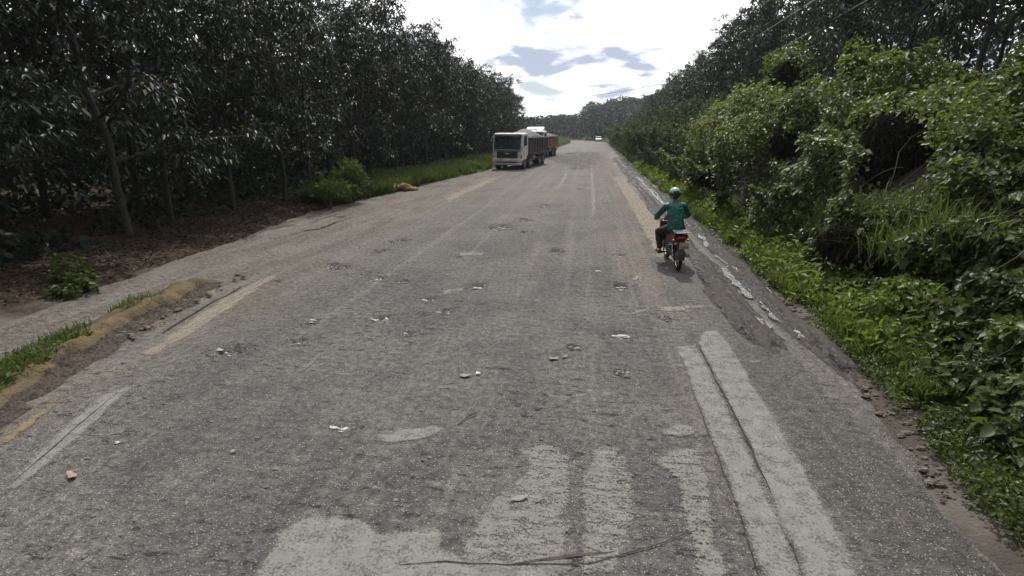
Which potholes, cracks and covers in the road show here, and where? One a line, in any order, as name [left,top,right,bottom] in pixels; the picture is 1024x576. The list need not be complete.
pothole [318,259,358,273]
pothole [482,223,515,232]
pothole [611,368,633,379]
pothole [604,281,637,293]
pothole [564,343,584,351]
